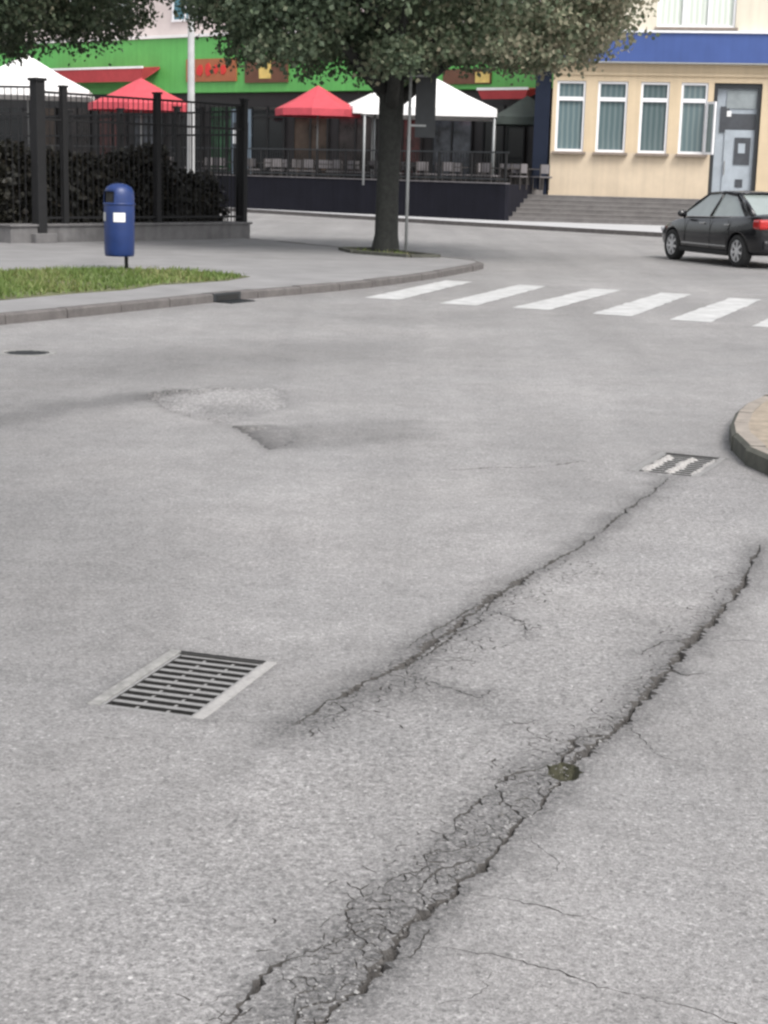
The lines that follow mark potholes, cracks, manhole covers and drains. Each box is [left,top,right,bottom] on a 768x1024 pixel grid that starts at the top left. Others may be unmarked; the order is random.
crack [285,478,668,738]
pothole [232,425,297,450]
crack [175,545,768,1024]
drain grate [86,649,277,720]
drain grate [629,452,726,477]
